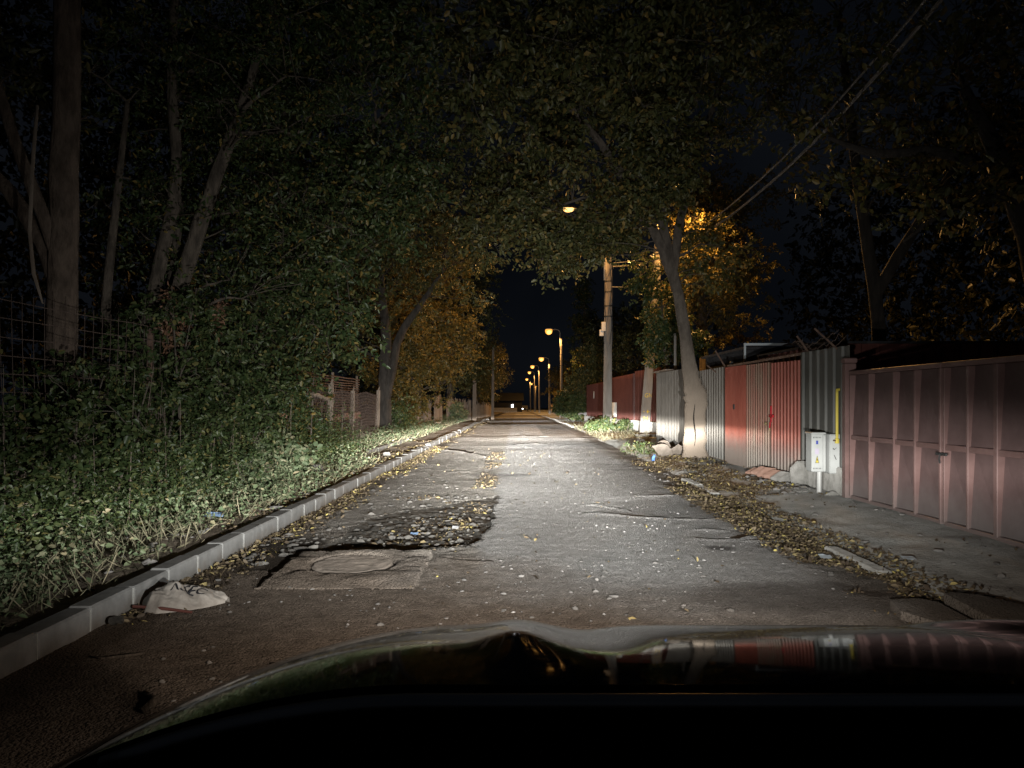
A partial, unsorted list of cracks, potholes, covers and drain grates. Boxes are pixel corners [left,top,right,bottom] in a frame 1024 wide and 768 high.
crack [432,436,597,458]
crack [580,494,809,544]
manhole cover [254,549,433,590]
pothole [309,495,501,551]
